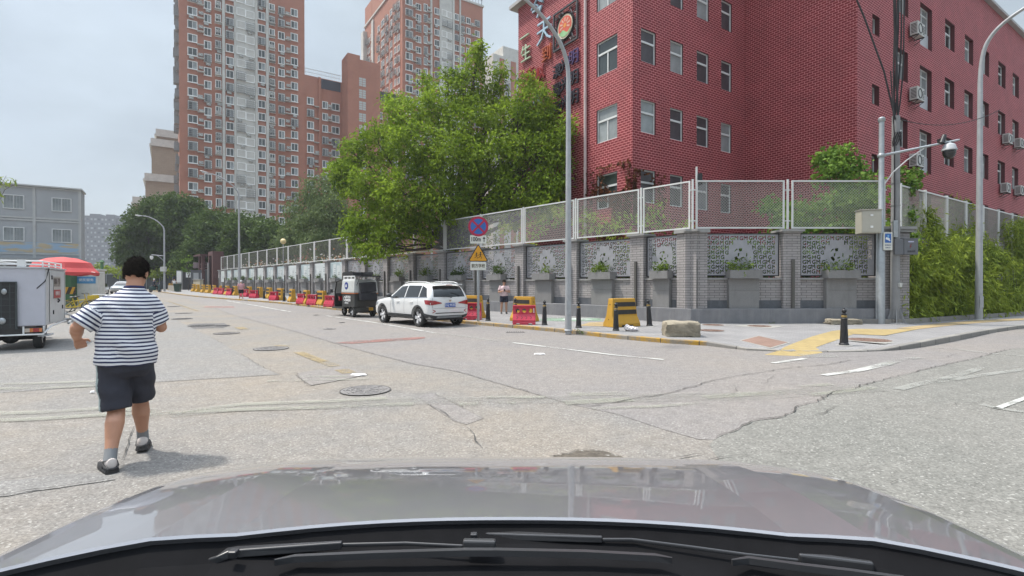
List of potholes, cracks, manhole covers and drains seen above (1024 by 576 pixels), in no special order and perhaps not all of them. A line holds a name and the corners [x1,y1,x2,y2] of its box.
manhole cover [339,385,391,395]
crack [715,377,891,438]
crack [576,356,860,406]
pothole [543,449,632,458]
crack [0,470,116,522]
